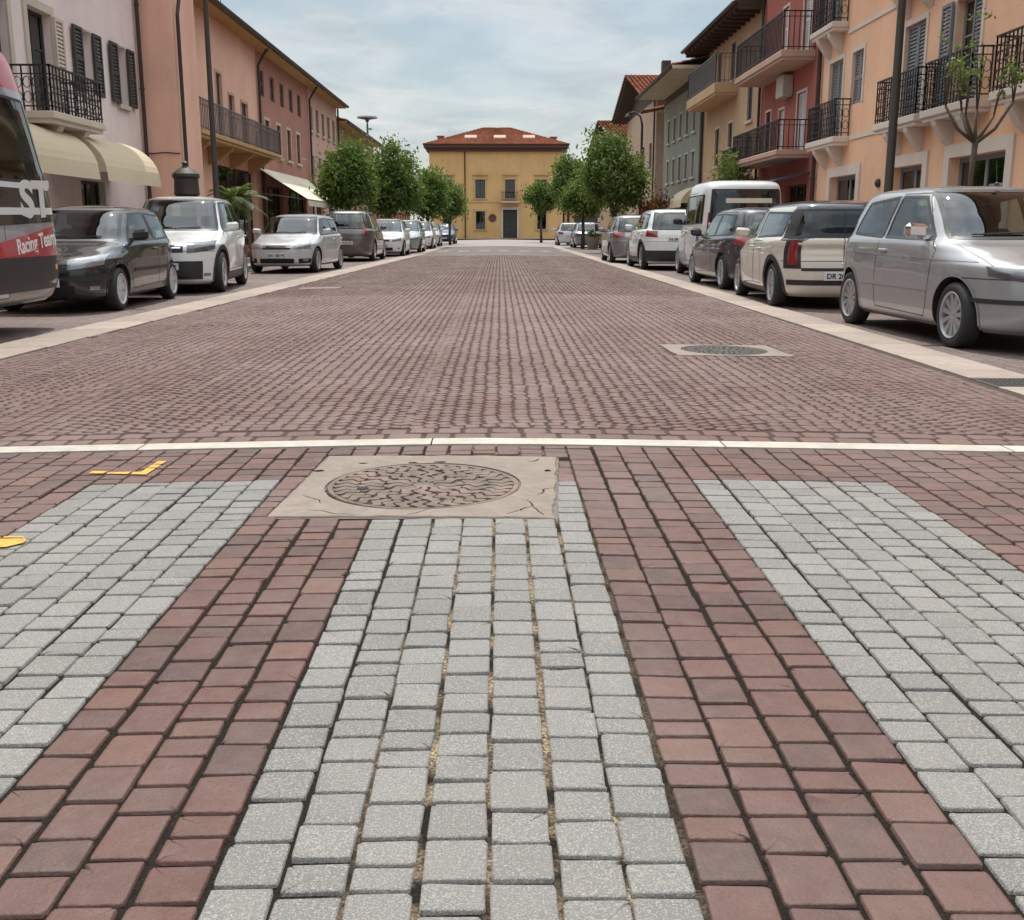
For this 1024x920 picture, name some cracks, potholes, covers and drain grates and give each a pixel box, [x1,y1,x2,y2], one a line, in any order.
manhole cover [658,344,796,357]
drain grate [970,378,1024,388]
manhole cover [267,455,559,521]
